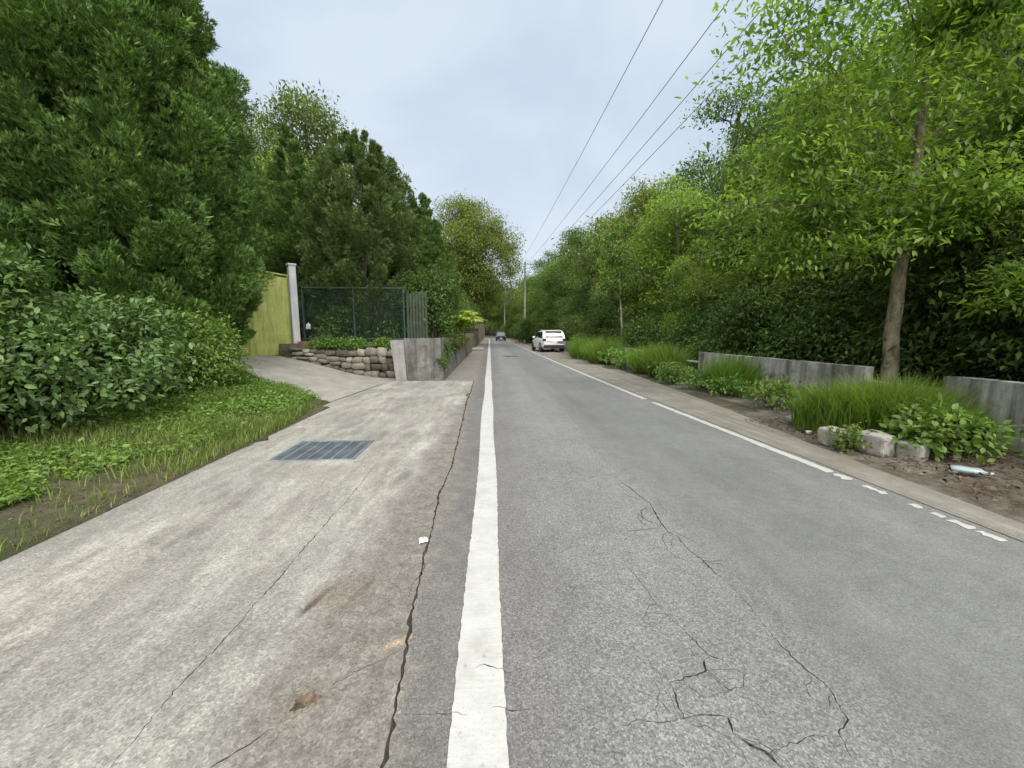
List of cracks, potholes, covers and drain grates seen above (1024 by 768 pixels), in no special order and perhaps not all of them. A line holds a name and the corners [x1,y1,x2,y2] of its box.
crack [331,380,528,768]
crack [210,728,273,768]
drain grate [268,440,375,461]
crack [594,475,852,768]
